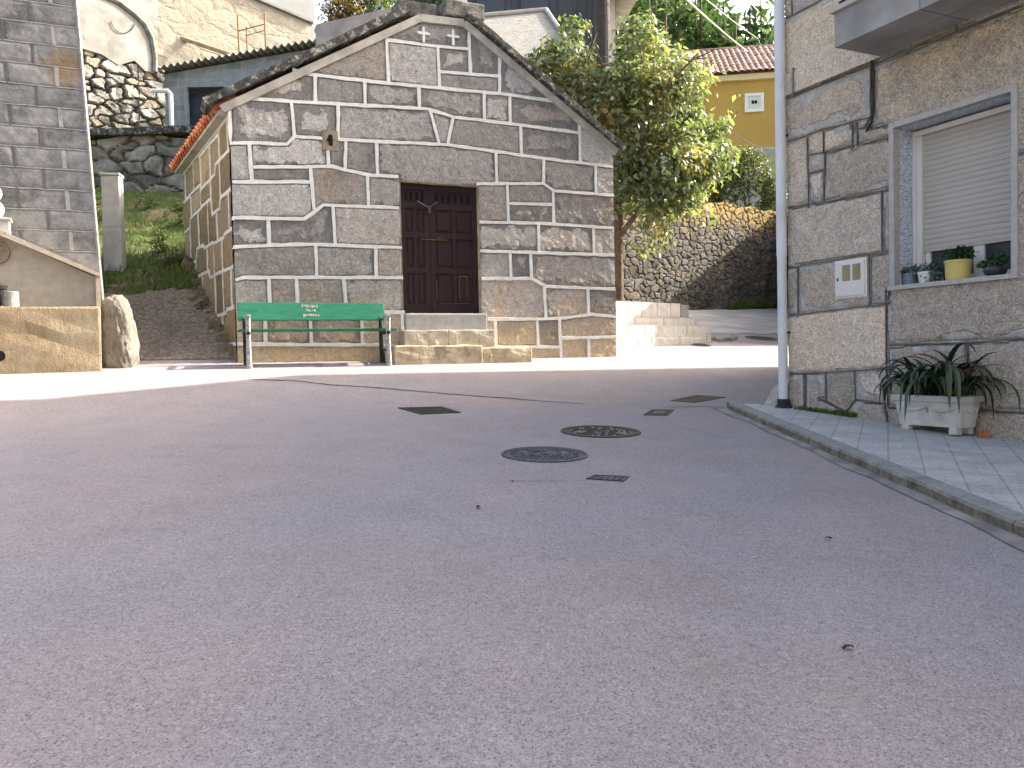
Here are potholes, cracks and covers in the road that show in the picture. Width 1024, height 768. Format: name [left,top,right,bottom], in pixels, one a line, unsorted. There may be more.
drain grate [398,406,461,415]
manhole cover [561,425,641,438]
drain grate [671,395,725,403]
manhole cover [501,446,588,463]
